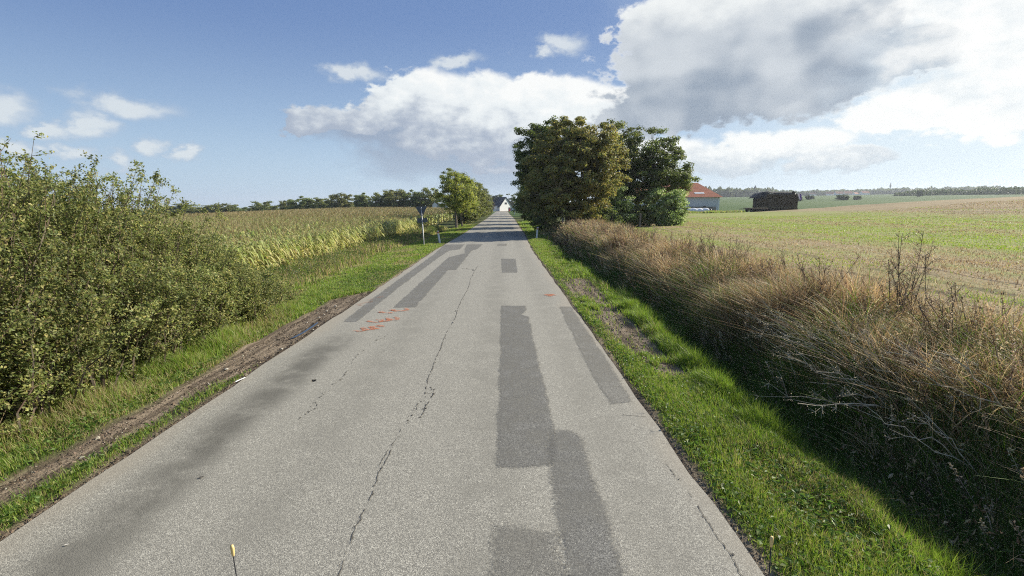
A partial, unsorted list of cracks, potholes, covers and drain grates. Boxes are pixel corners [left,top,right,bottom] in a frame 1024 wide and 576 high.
crack [337,286,469,576]
crack [668,466,743,576]
